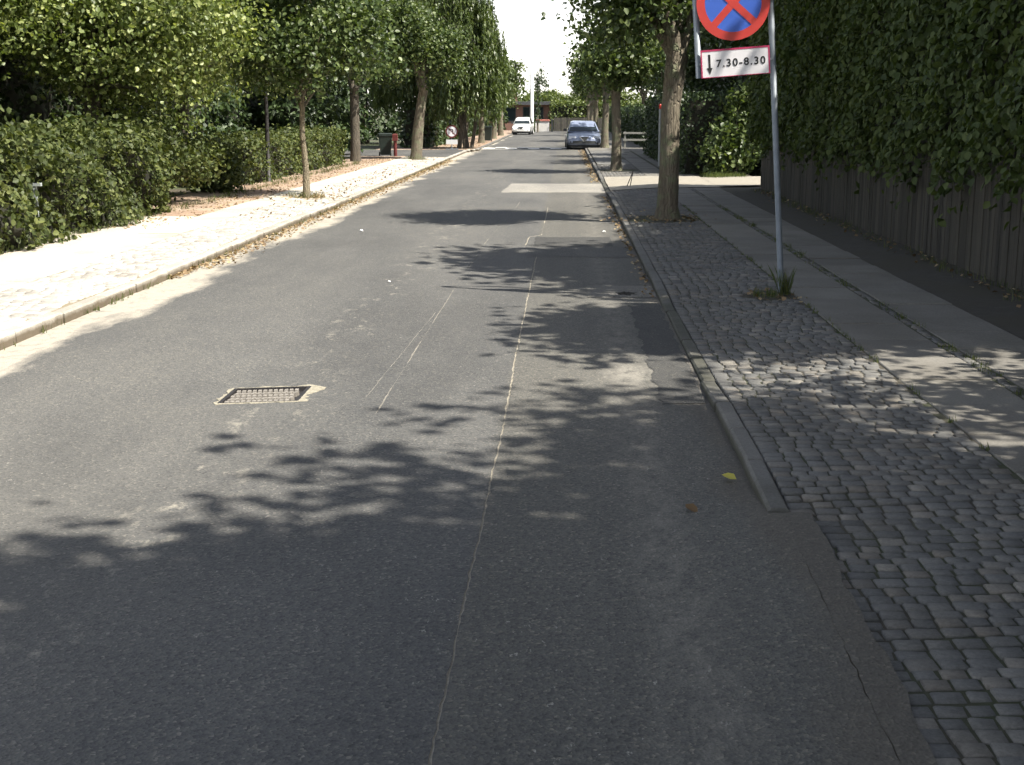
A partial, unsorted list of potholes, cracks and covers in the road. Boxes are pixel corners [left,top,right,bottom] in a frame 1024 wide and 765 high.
crack [806,564,901,763]
crack [366,202,520,413]
